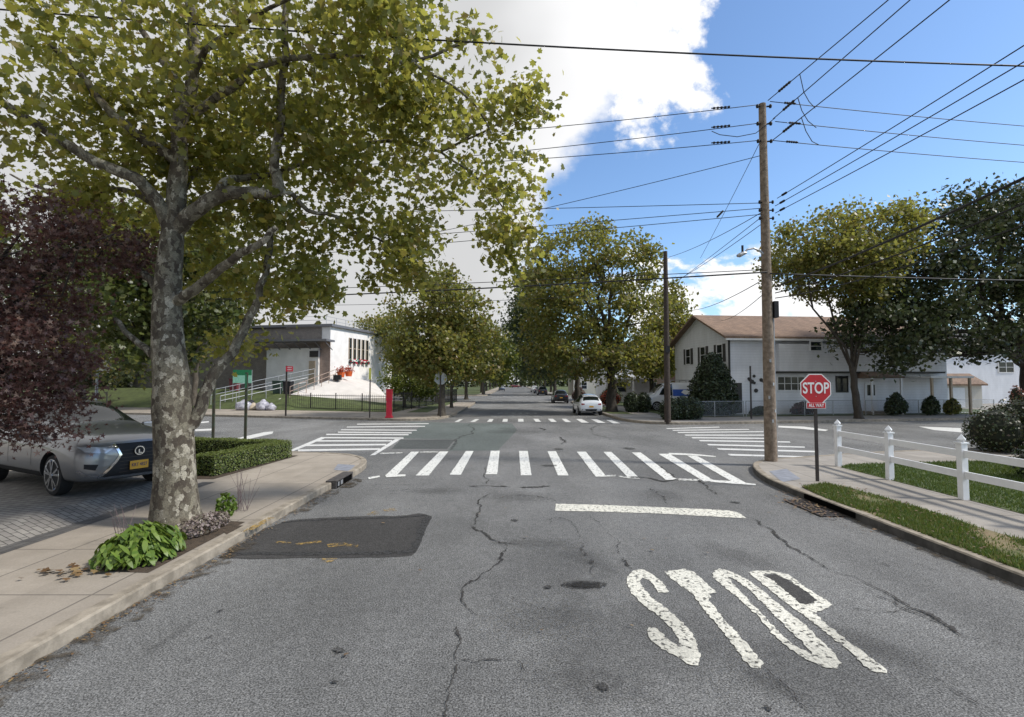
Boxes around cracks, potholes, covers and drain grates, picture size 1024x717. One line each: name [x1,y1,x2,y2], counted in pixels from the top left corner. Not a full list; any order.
drain grate [784,493,856,518]
crack [444,468,545,717]
crack [750,517,1021,649]
crack [550,517,631,575]
drain grate [326,472,361,489]
